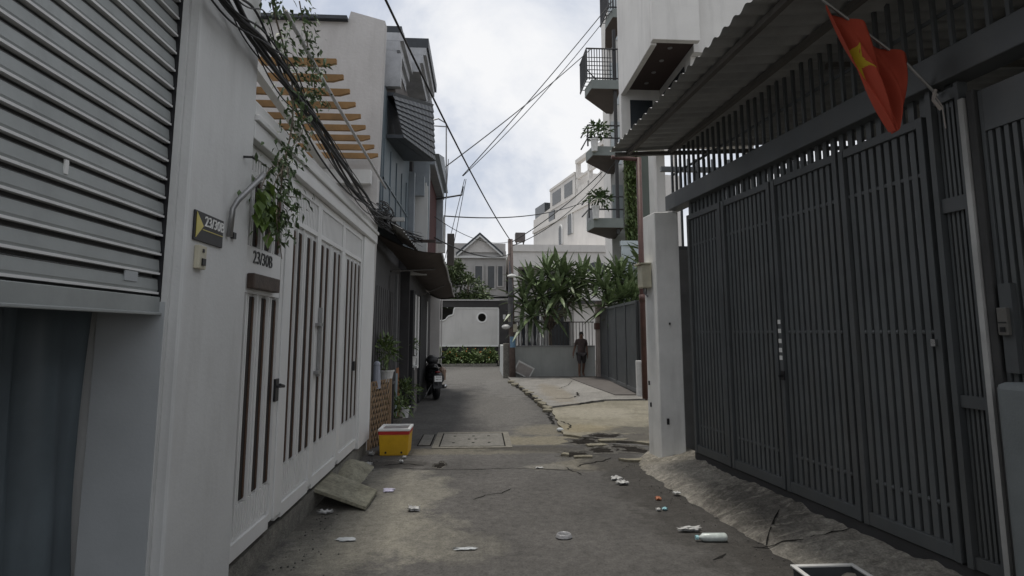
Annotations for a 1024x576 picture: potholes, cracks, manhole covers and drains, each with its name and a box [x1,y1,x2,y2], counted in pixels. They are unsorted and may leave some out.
manhole cover [417,434,436,446]
pothole [580,446,626,454]
crack [758,510,852,548]
manhole cover [431,432,513,449]
pothole [555,450,595,459]
pothole [602,444,650,454]
pothole [561,437,606,446]
crack [384,442,634,475]
